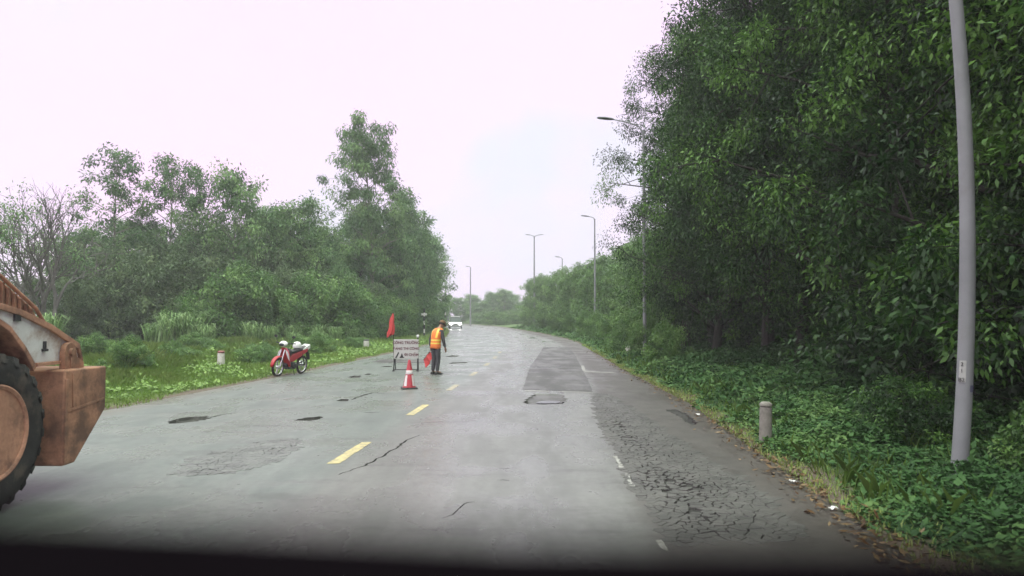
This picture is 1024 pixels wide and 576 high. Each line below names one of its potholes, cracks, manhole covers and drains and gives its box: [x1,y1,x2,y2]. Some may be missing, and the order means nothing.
crack [589,393,809,536]
pothole [523,394,568,405]
pothole [666,409,696,425]
crack [338,435,419,475]
pothole [168,416,212,424]
